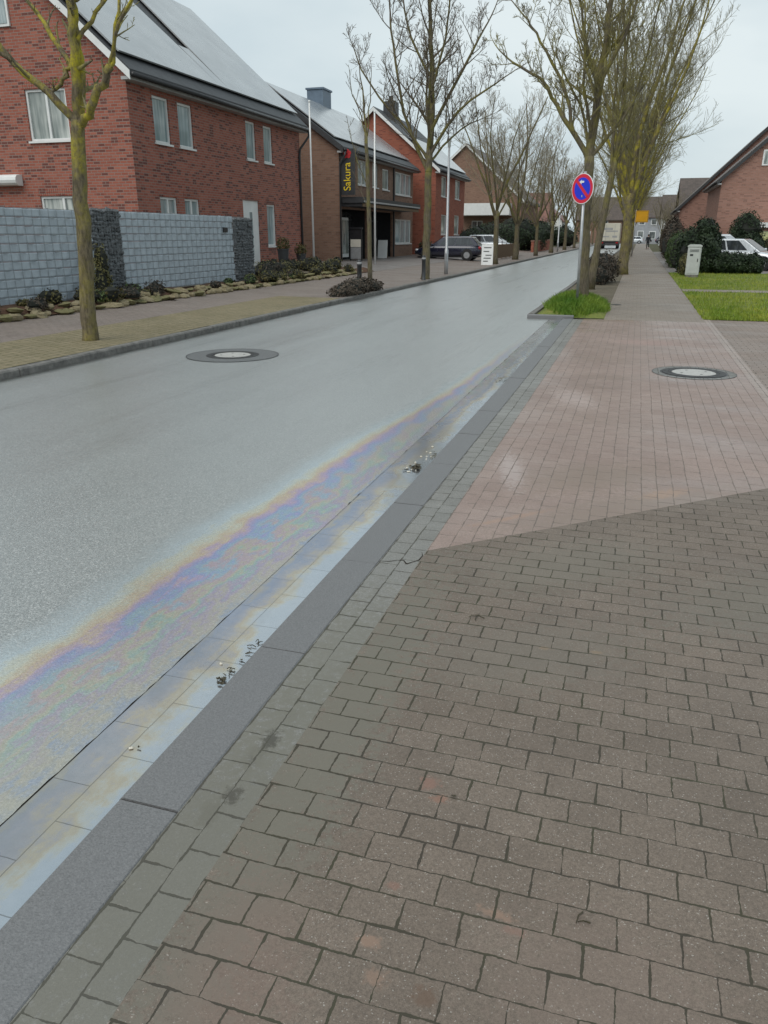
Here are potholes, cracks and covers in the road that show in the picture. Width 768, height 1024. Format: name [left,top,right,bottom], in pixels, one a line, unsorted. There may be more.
manhole cover [652,366,737,380]
manhole cover [186,349,279,362]
